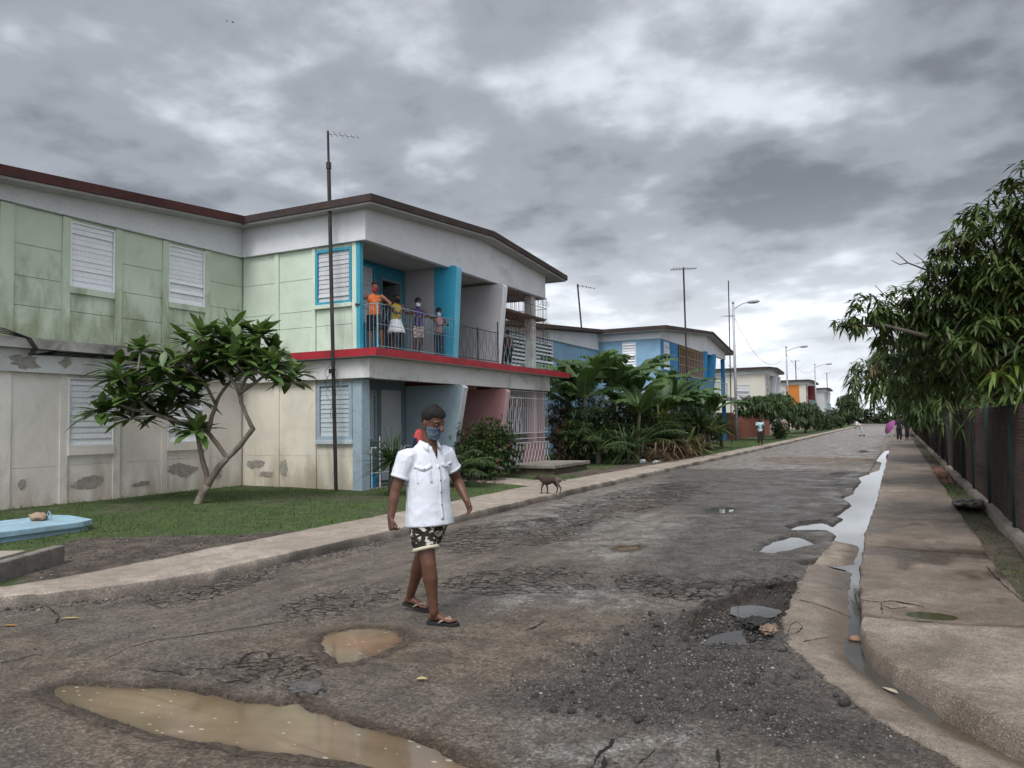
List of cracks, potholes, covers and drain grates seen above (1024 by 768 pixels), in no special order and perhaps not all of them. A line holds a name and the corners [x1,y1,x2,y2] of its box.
pothole [38,679,499,768]
crack [139,650,322,697]
pothole [677,579,802,649]
crack [444,566,597,596]
crack [591,738,615,768]
crack [104,588,400,660]
pothole [307,625,416,666]
